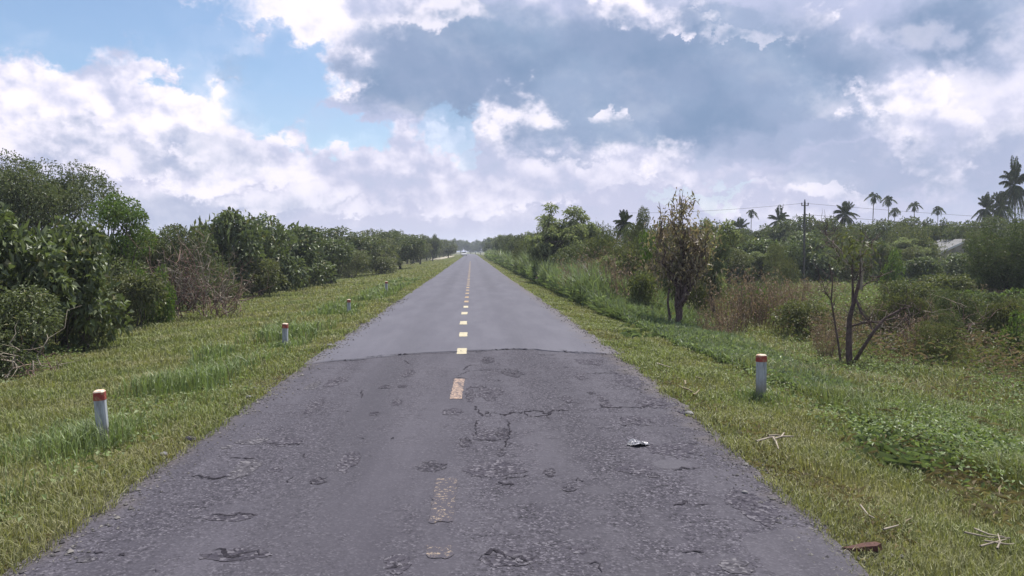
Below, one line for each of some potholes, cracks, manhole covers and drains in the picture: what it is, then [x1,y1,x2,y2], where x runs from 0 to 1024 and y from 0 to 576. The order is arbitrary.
pothole [501,368,525,378]
pothole [383,553,412,575]
pothole [336,451,361,474]
pothole [198,548,272,561]
pothole [463,460,528,478]
pothole [204,512,258,522]
pothole [480,549,535,567]
pothole [416,460,447,473]
crack [475,402,577,447]
